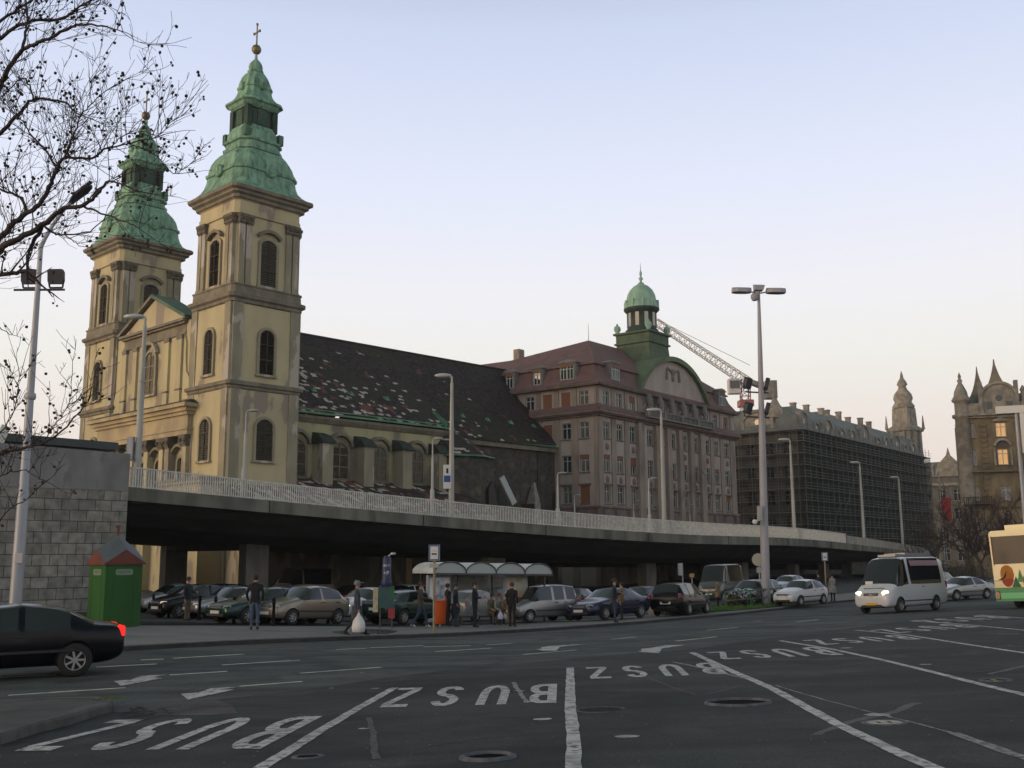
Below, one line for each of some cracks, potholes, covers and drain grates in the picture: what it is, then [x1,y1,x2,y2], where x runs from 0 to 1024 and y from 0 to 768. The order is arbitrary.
manhole cover [459,750,517,762]
manhole cover [704,697,772,707]
